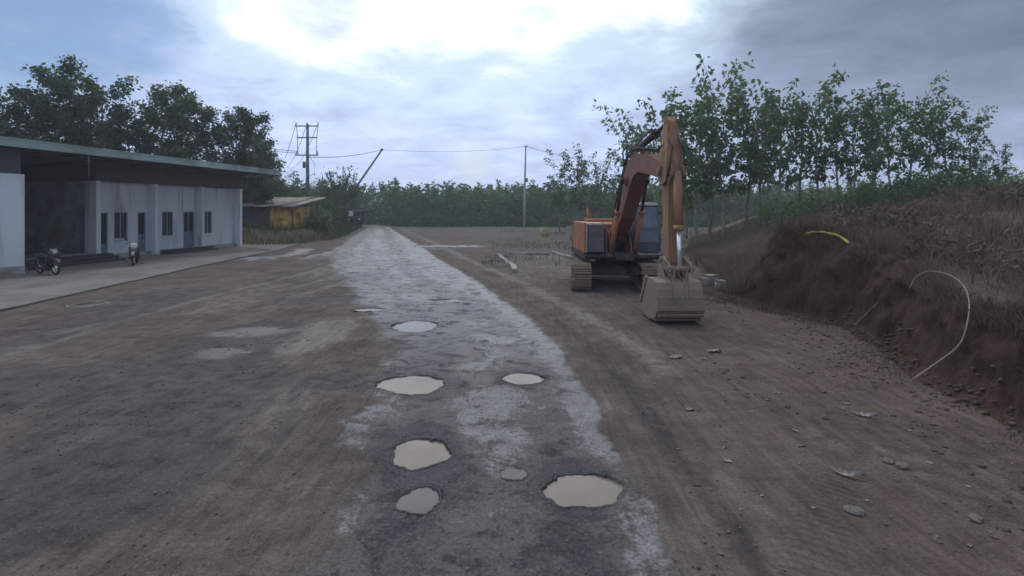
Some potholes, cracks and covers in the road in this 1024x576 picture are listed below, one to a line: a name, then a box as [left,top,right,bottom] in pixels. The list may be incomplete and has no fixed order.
pothole [498,466,530,482]
pothole [537,471,630,509]
pothole [371,374,451,396]
pothole [388,320,442,333]
pothole [389,436,456,472]
pothole [498,372,549,386]
pothole [393,485,444,517]
